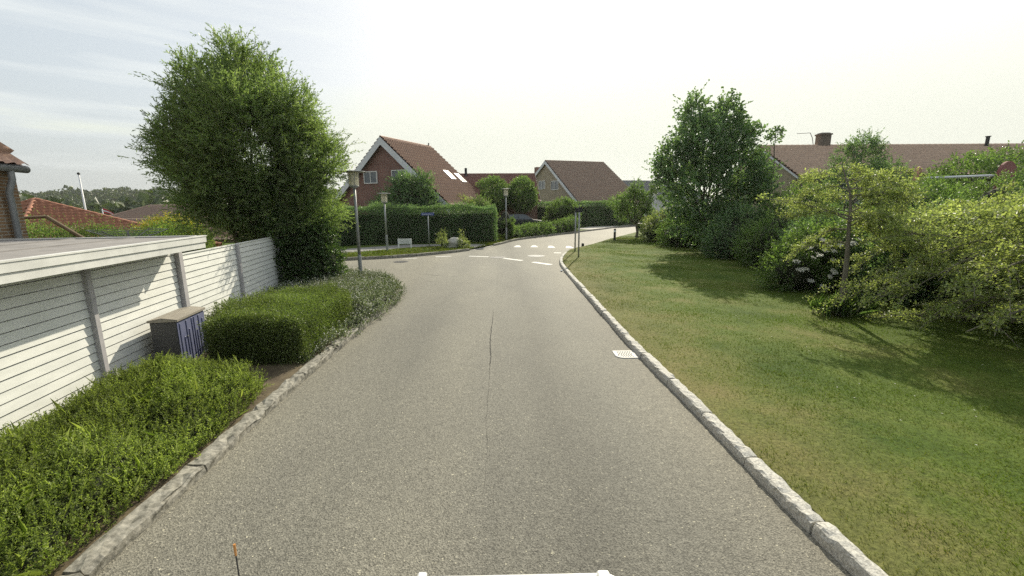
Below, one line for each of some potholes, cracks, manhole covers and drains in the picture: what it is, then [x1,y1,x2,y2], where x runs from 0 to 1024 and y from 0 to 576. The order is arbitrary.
drain grate [612,350,640,359]
crack [484,319,493,482]
